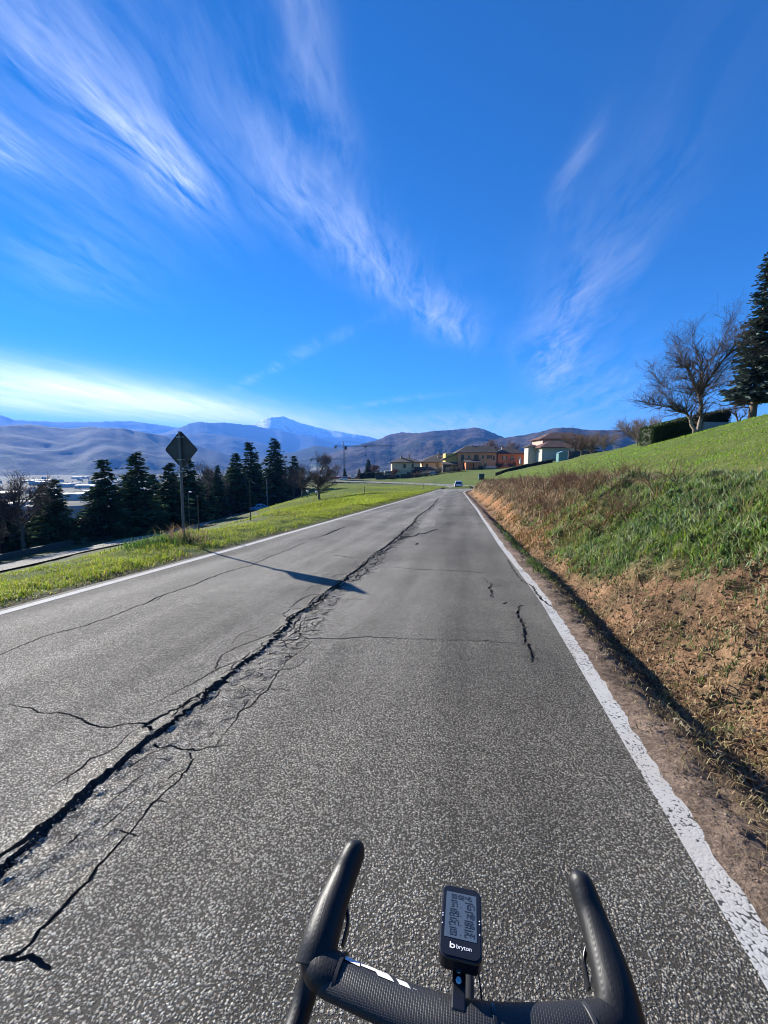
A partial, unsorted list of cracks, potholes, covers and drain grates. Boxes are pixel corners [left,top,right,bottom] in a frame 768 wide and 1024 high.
crack [0,499,553,970]
